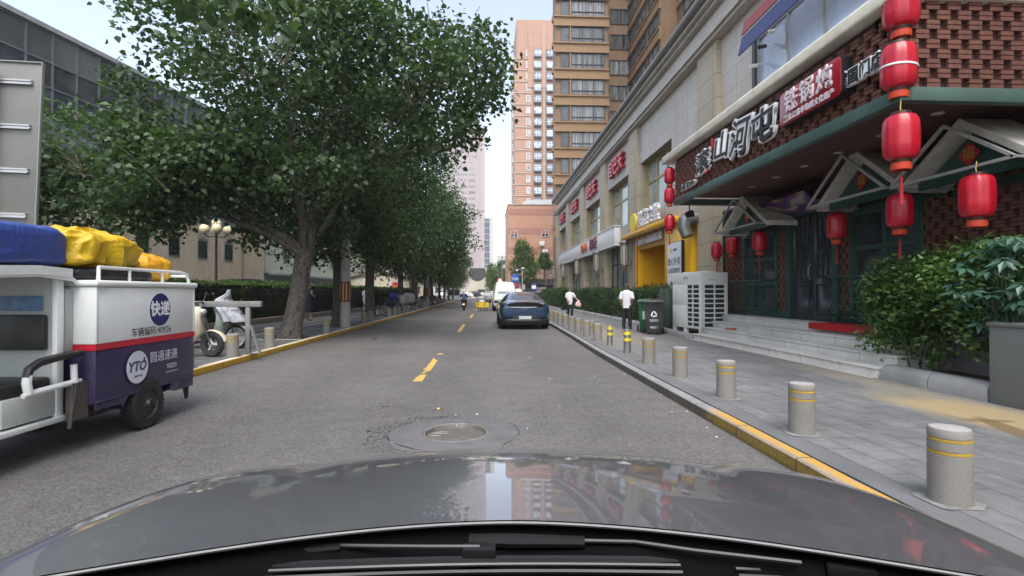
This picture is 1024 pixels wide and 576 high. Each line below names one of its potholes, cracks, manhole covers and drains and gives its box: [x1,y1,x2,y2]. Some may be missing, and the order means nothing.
crack [363,406,512,452]
manhole cover [388,417,531,452]
